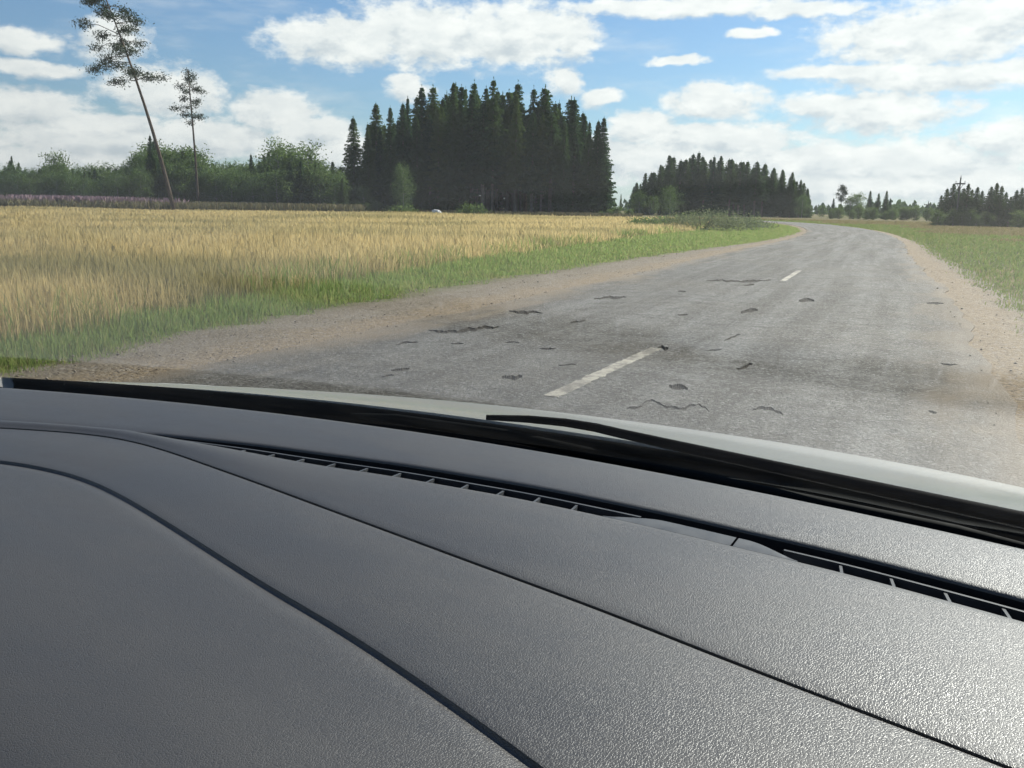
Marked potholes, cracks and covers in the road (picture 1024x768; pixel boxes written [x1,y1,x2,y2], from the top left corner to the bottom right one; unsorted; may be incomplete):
crack [429,310,543,345]
